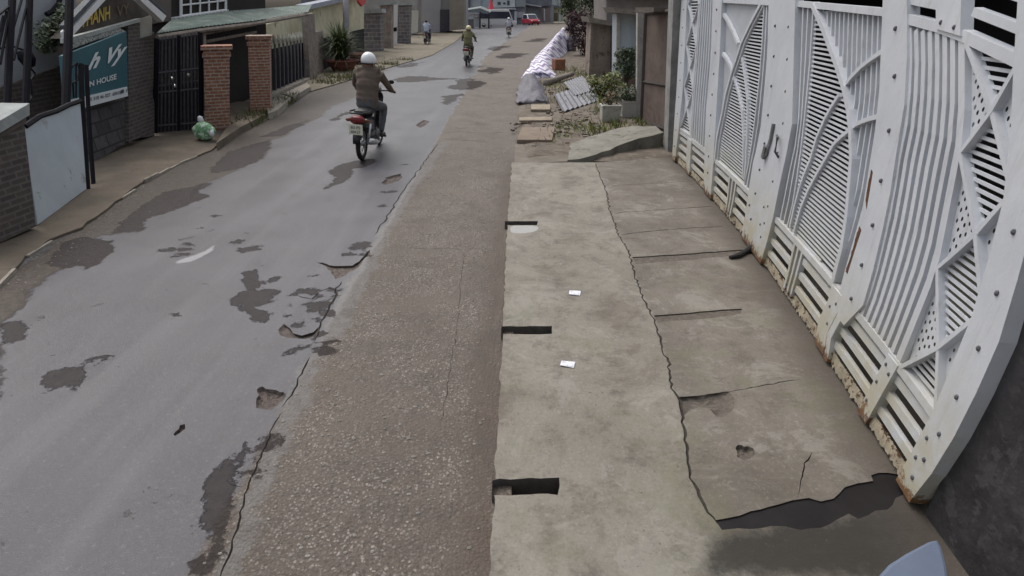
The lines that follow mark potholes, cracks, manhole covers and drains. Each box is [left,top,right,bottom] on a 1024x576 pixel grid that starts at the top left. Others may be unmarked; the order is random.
crack [416,248,465,427]
pothole [679,392,734,417]
crack [799,453,812,491]
crack [596,164,799,520]
pothole [256,386,286,410]
pothole [735,445,755,460]
